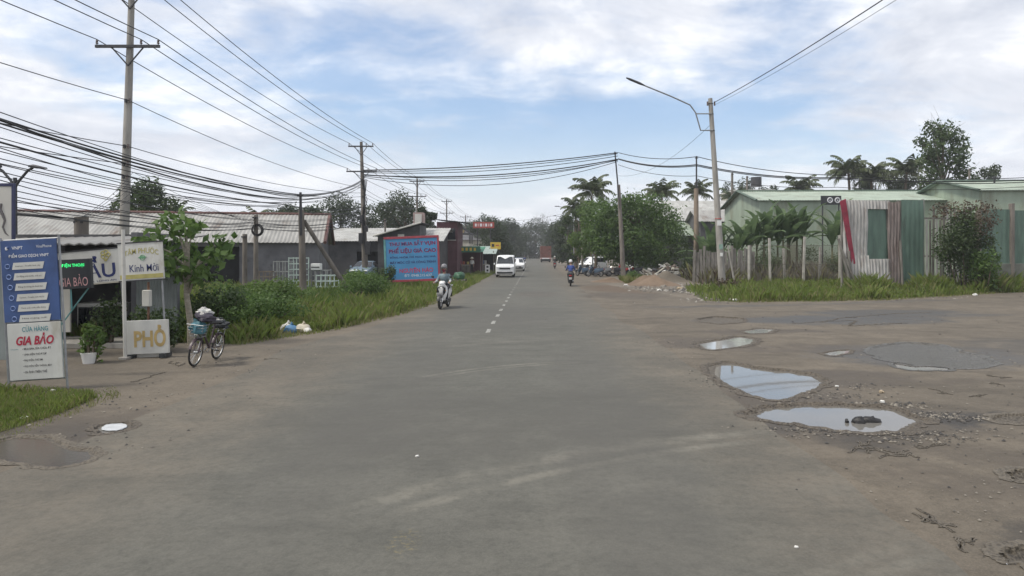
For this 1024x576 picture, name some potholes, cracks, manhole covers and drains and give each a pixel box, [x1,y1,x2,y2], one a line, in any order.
pothole [733,401,940,436]
pothole [699,361,834,402]
crack [847,440,944,459]
crack [130,361,185,382]
pothole [0,434,108,470]
pothole [691,336,763,350]
crack [911,508,977,553]
